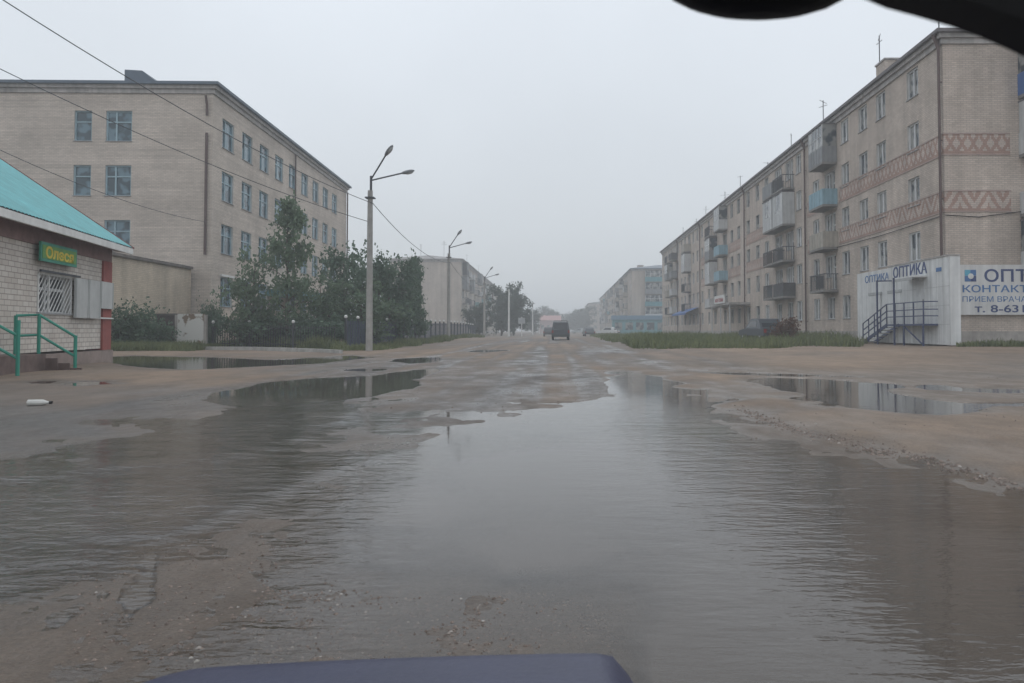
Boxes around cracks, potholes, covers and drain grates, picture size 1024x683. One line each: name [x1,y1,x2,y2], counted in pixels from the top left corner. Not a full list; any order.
pothole [48,379,133,387]
pothole [379,356,452,364]
